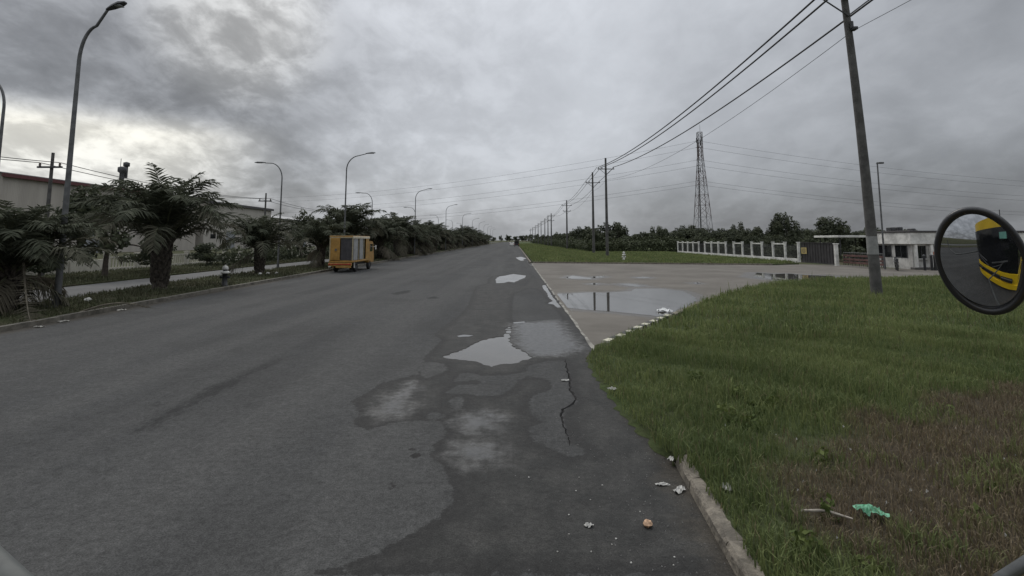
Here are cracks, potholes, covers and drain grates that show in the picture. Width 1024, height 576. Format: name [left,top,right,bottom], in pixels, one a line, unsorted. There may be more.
crack [560,360,577,446]
